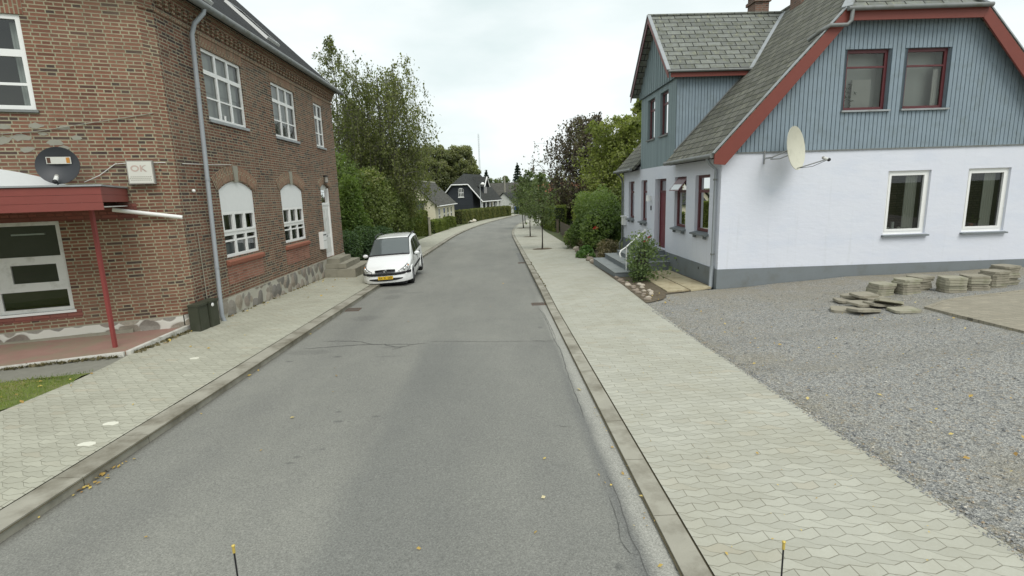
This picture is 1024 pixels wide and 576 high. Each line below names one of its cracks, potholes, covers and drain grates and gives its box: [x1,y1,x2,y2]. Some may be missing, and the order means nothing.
crack [608,479,648,575]
crack [308,341,506,350]
